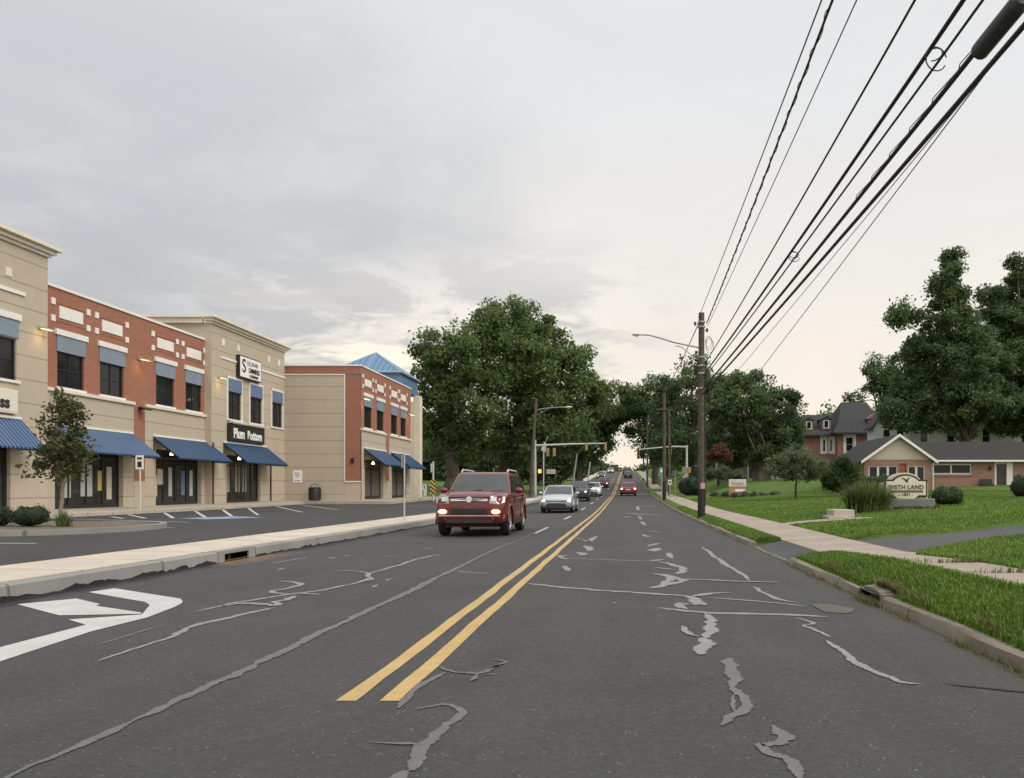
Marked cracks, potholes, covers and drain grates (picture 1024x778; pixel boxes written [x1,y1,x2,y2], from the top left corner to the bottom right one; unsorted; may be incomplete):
crack [367,659,507,778]
crack [527,506,920,778]
drain grate [860,585,896,607]
drain grate [209,546,254,563]
crack [97,548,439,661]
crack [951,684,1024,692]
